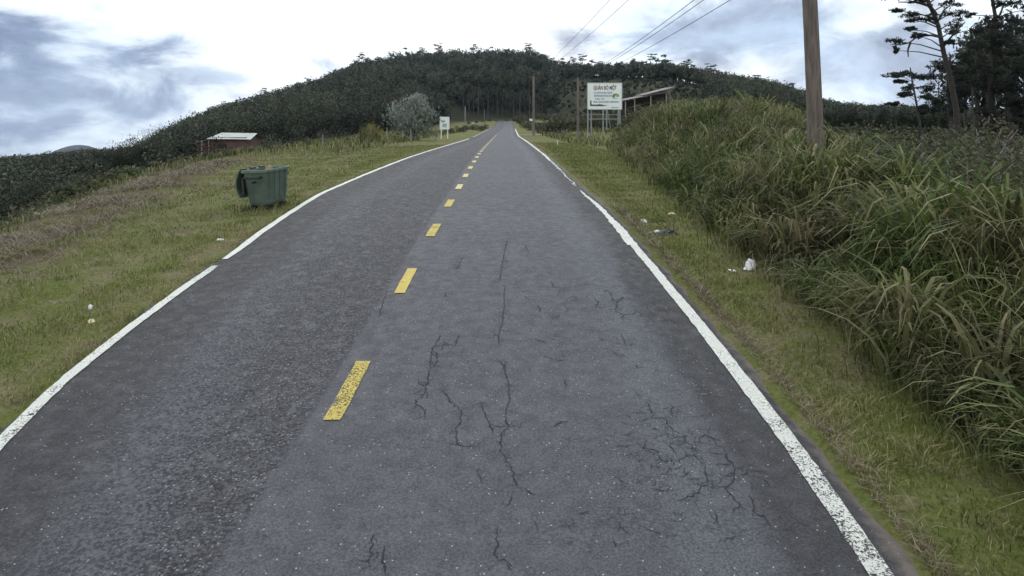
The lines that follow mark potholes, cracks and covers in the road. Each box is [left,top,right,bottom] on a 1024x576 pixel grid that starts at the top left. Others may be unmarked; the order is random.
crack [355,534,390,574]
crack [412,240,538,570]
crack [521,245,674,427]
crack [521,391,798,570]
